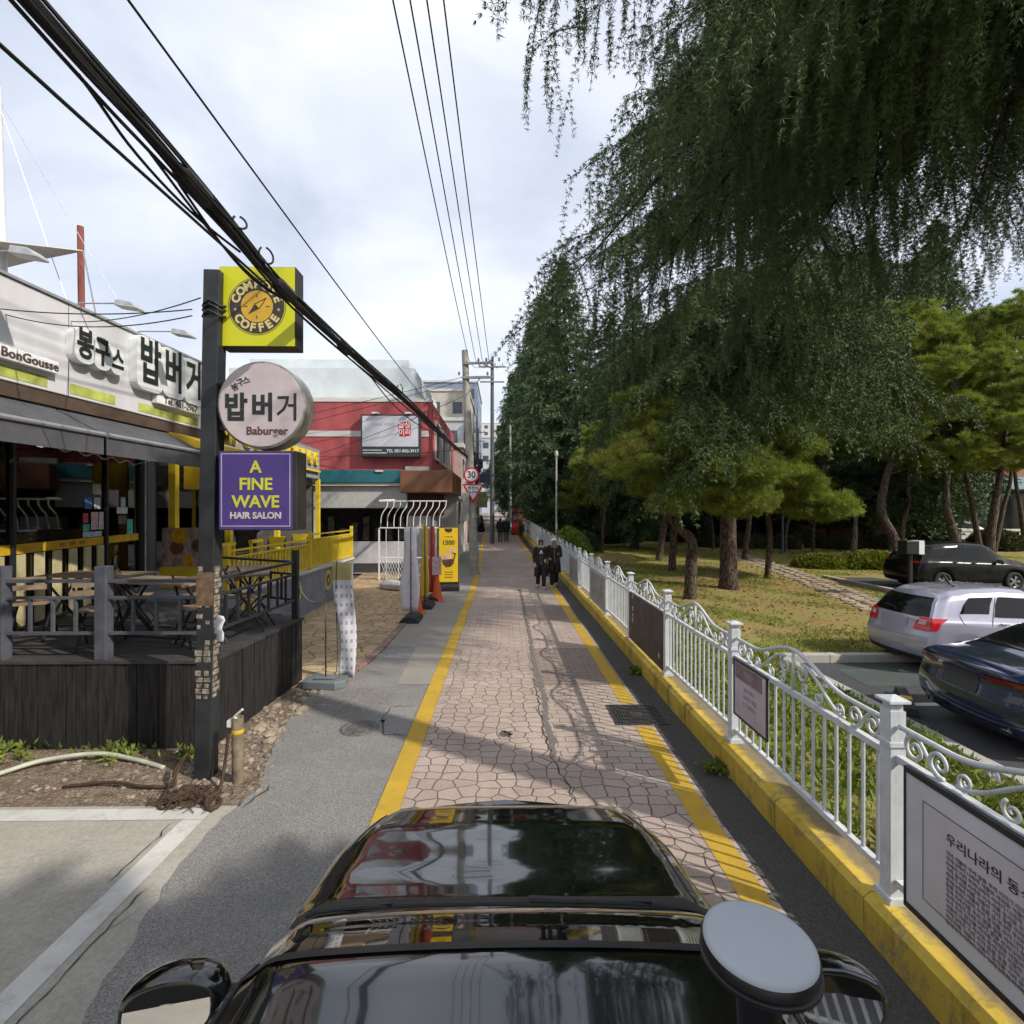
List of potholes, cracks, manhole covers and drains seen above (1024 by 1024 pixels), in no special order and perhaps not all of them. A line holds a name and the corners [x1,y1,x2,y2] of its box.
manhole cover [339,720,380,737]
crack [518,589,577,804]
drain grate [606,704,670,725]
